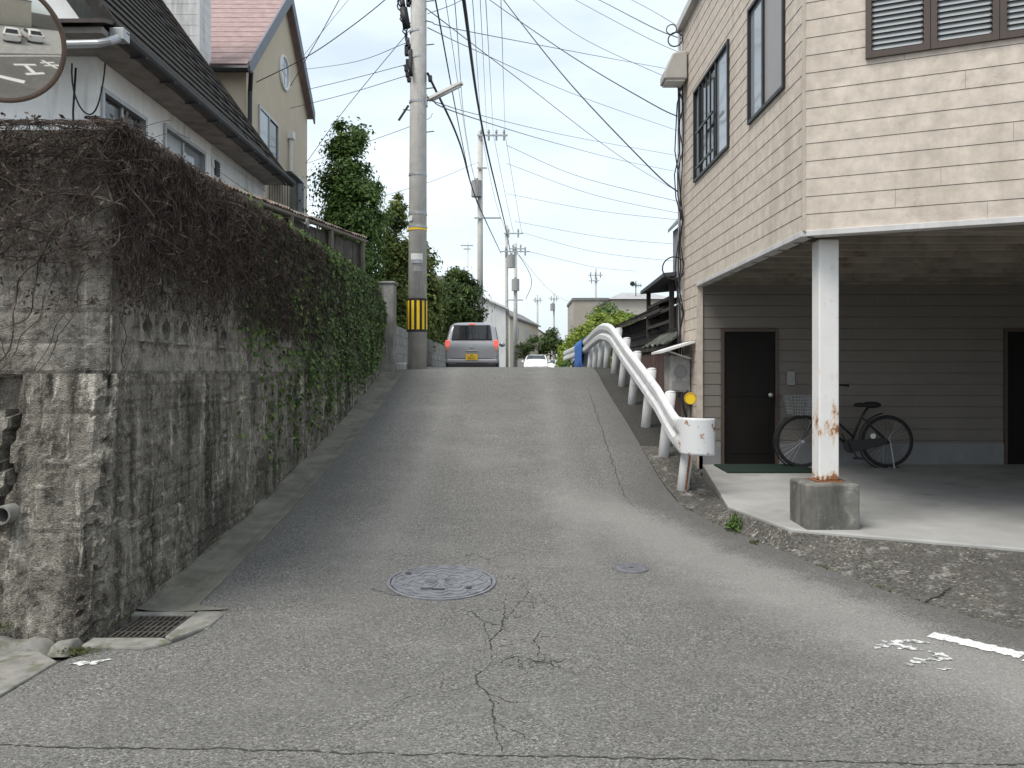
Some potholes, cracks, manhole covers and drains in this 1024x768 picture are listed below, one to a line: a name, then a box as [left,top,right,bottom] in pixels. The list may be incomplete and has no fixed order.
manhole cover [387,565,496,601]
manhole cover [614,563,649,574]
drain grate [82,611,226,655]
crack [405,552,577,752]
